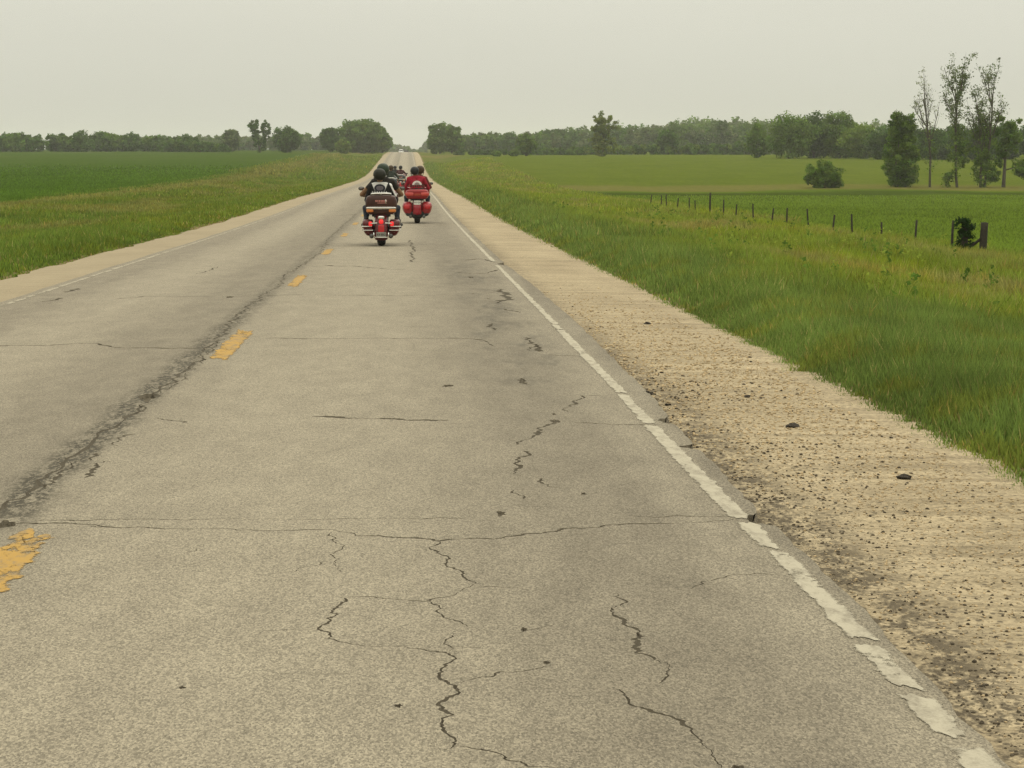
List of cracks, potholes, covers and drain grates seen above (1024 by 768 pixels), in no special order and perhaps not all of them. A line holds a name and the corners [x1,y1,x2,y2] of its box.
crack [525,338,565,356]
crack [510,395,635,499]
crack [85,434,133,478]
crack [15,515,731,768]
crack [327,240,416,270]
